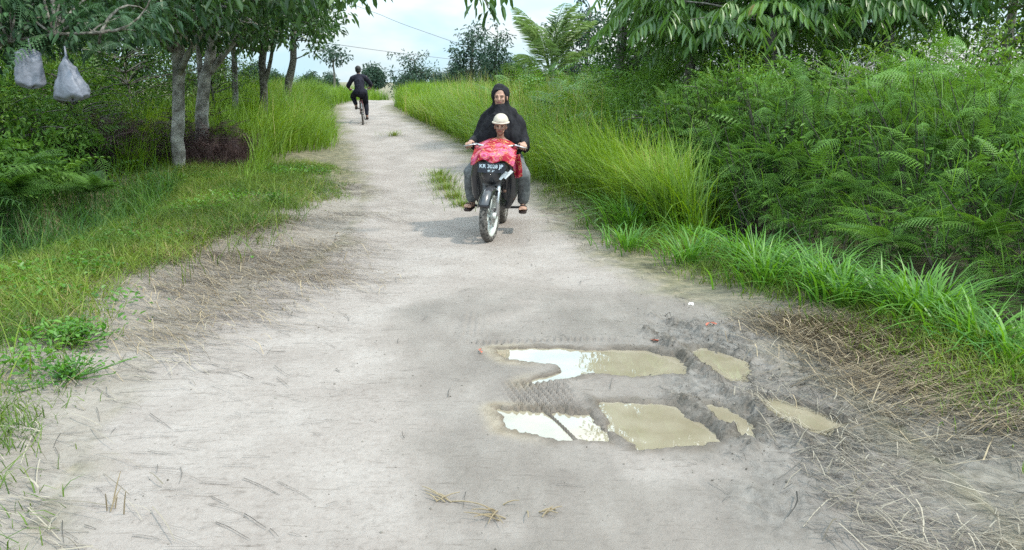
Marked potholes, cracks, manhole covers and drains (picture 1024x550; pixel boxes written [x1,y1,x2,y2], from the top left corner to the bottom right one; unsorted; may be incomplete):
pothole [491,344,697,386]
pothole [681,340,759,385]
pothole [746,389,854,439]
pothole [489,402,616,444]
pothole [697,396,769,439]
pothole [589,395,729,452]
